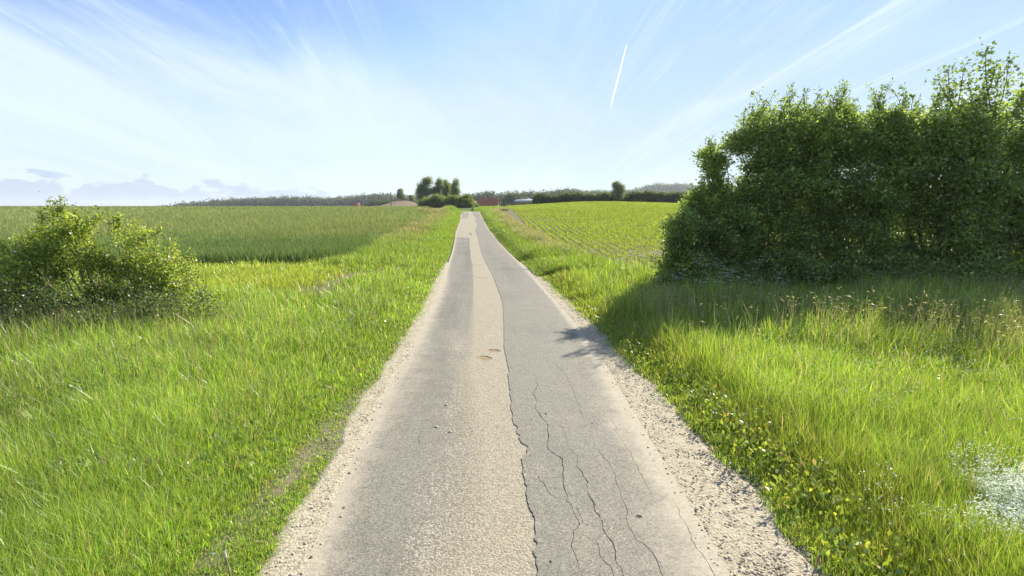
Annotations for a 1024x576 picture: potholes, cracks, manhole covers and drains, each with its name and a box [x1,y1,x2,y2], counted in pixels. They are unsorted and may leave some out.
crack [533,372,715,576]
